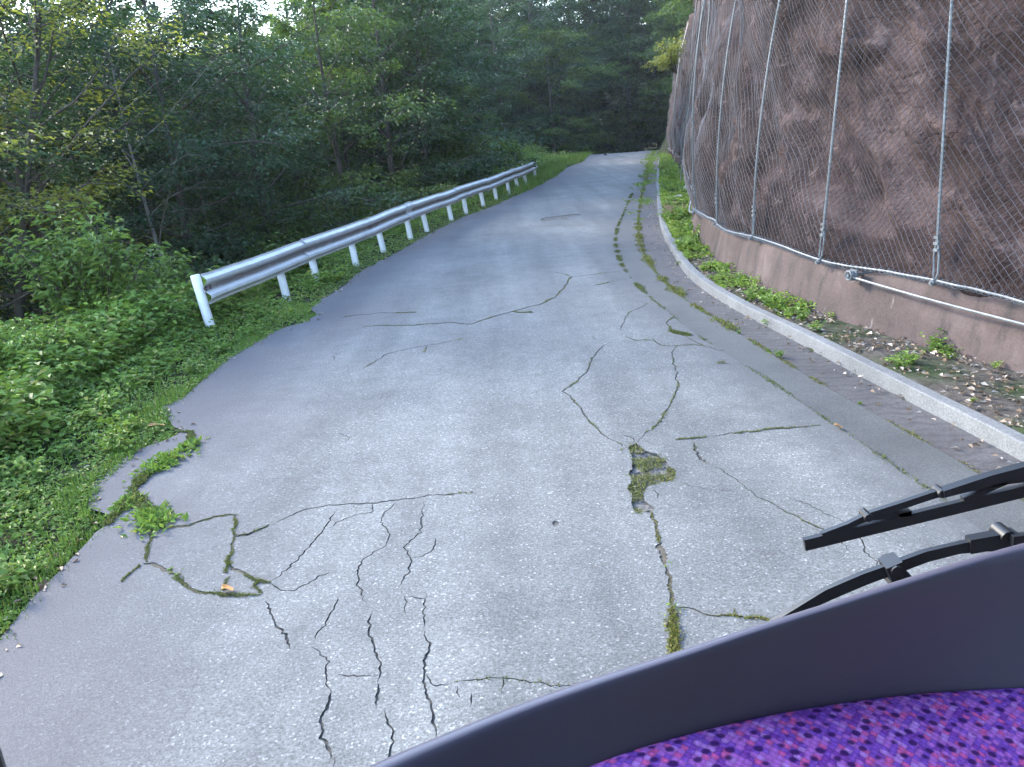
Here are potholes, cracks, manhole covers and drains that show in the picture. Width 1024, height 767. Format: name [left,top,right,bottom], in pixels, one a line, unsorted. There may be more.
pothole [625,442,678,514]
crack [561,303,878,654]
crack [94,429,576,767]
crack [342,271,622,367]
